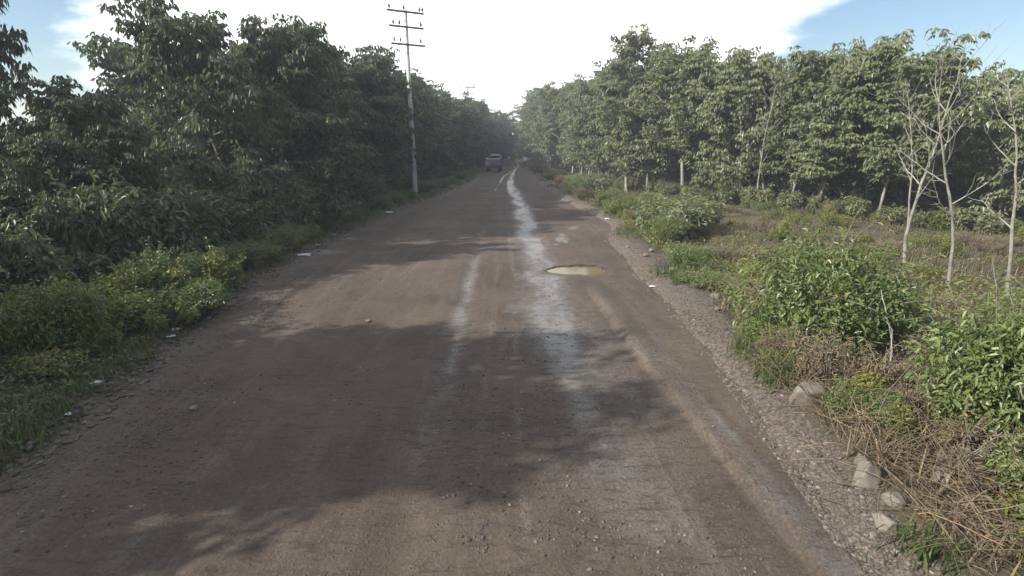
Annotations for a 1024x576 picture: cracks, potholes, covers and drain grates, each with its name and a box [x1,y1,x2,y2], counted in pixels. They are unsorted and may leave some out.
pothole [536,263,615,276]
